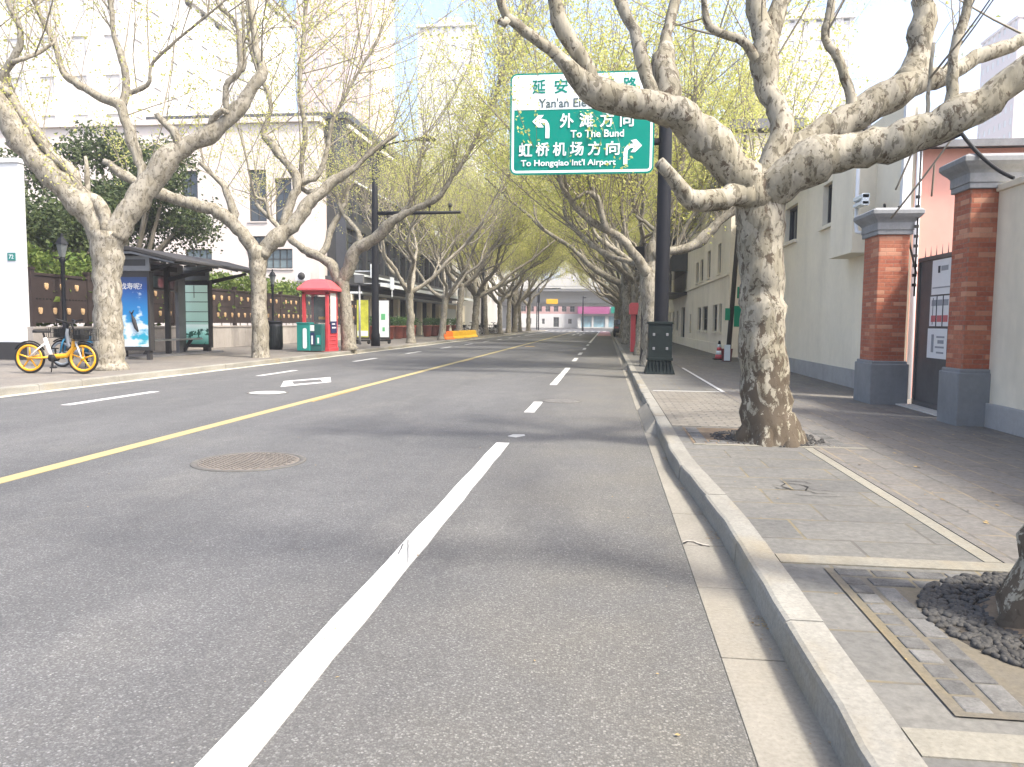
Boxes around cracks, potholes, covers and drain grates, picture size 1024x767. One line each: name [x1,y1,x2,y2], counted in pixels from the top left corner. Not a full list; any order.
crack [776,481,840,497]
manhole cover [190,452,306,472]
